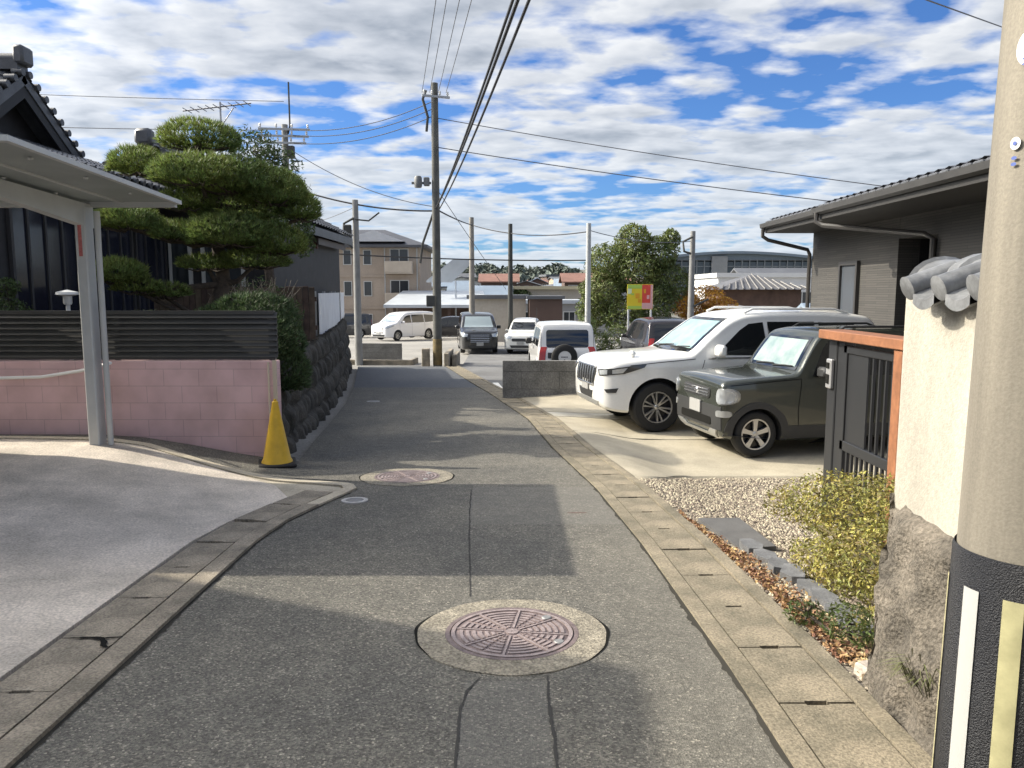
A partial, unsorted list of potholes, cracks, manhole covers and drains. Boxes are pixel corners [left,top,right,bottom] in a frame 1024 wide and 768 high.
crack [70,636,123,647]
crack [547,675,559,768]
manhole cover [414,599,610,676]
crack [454,678,479,768]
manhole cover [359,468,455,486]
